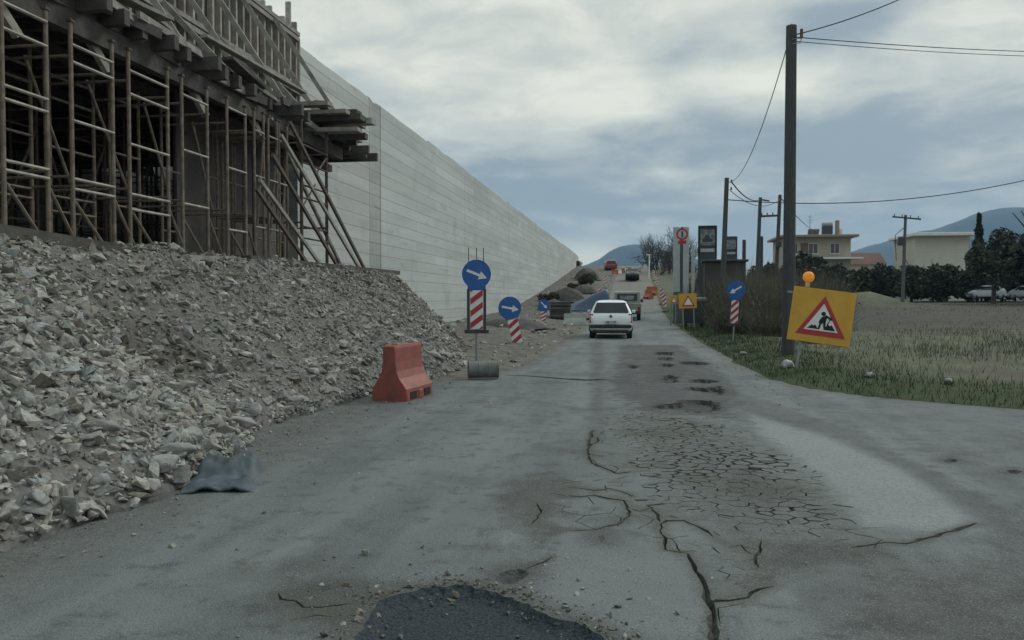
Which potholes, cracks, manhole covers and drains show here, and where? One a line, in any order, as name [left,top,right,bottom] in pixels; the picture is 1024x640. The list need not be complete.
pothole [496,569,529,584]
crack [278,592,351,618]
pothole [685,386,728,395]
pothole [652,400,721,413]
pothole [355,585,605,640]
crack [850,523,977,548]
pothole [661,375,680,383]
crack [550,409,882,640]
